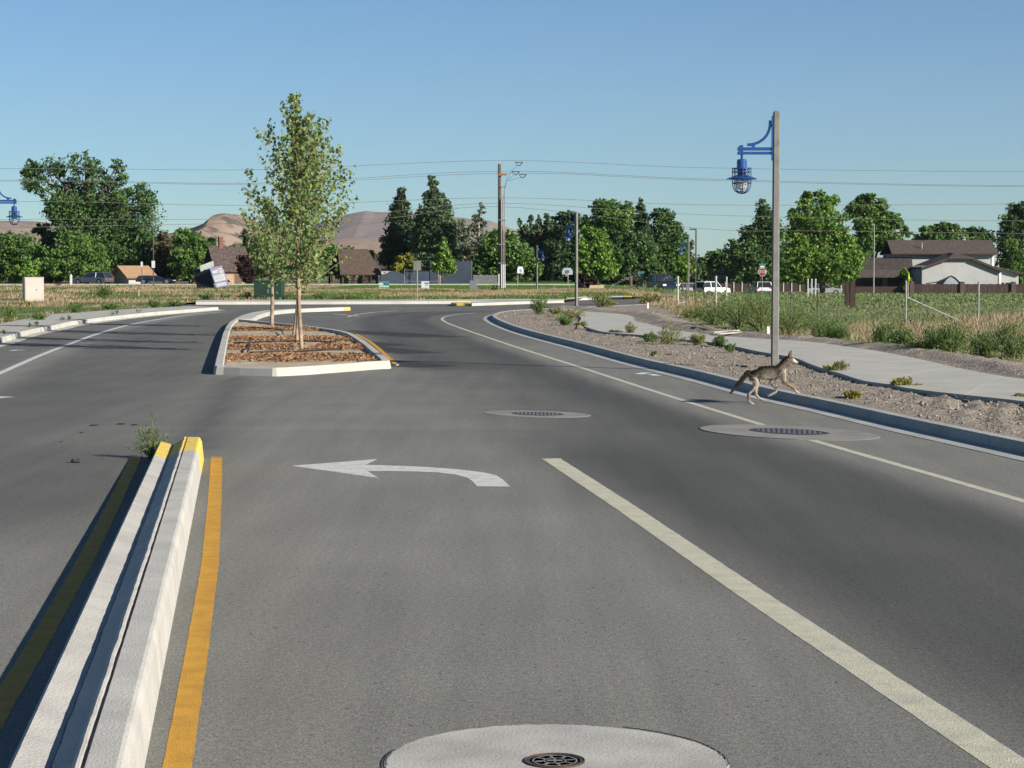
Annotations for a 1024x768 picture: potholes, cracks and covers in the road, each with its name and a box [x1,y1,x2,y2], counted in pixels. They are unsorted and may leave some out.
manhole cover [700,424,880,440]
manhole cover [484,410,591,418]
manhole cover [384,724,730,768]
